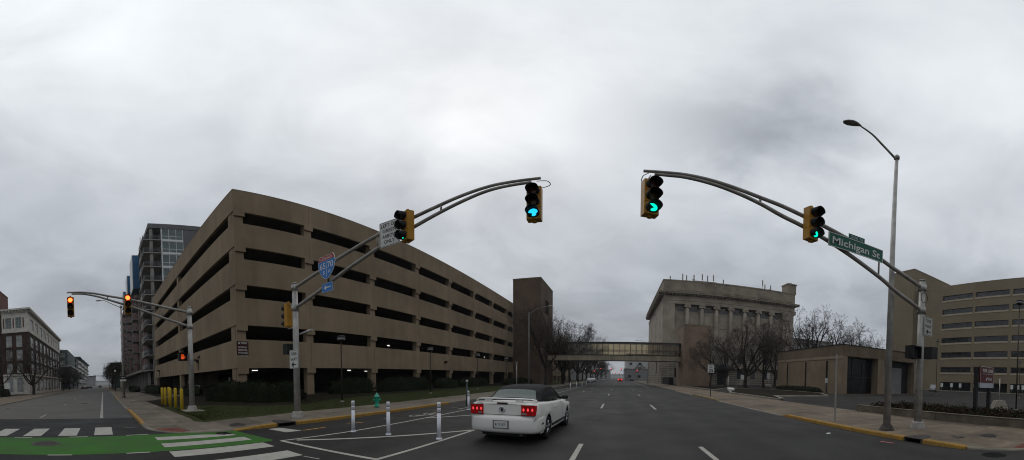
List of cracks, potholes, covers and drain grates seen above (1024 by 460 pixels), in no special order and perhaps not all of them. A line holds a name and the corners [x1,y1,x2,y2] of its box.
drain grate [904,435,931,444]
